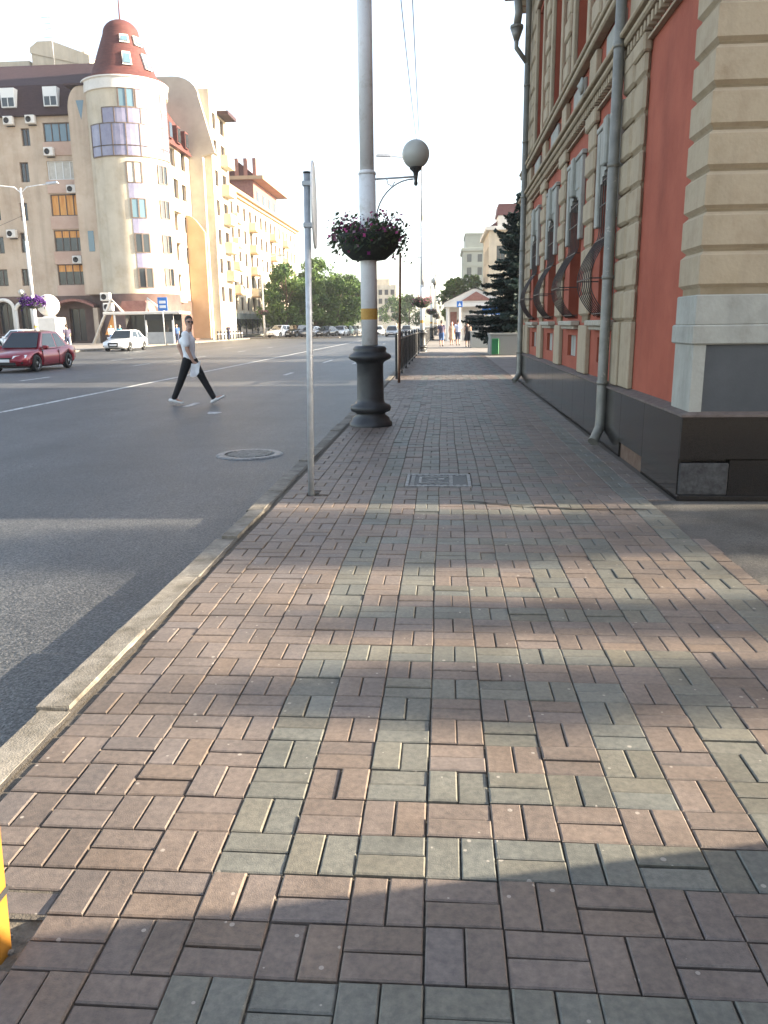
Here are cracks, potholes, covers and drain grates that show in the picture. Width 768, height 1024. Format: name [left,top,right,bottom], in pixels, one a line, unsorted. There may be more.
manhole cover [405,474,472,488]
manhole cover [216,449,283,460]
